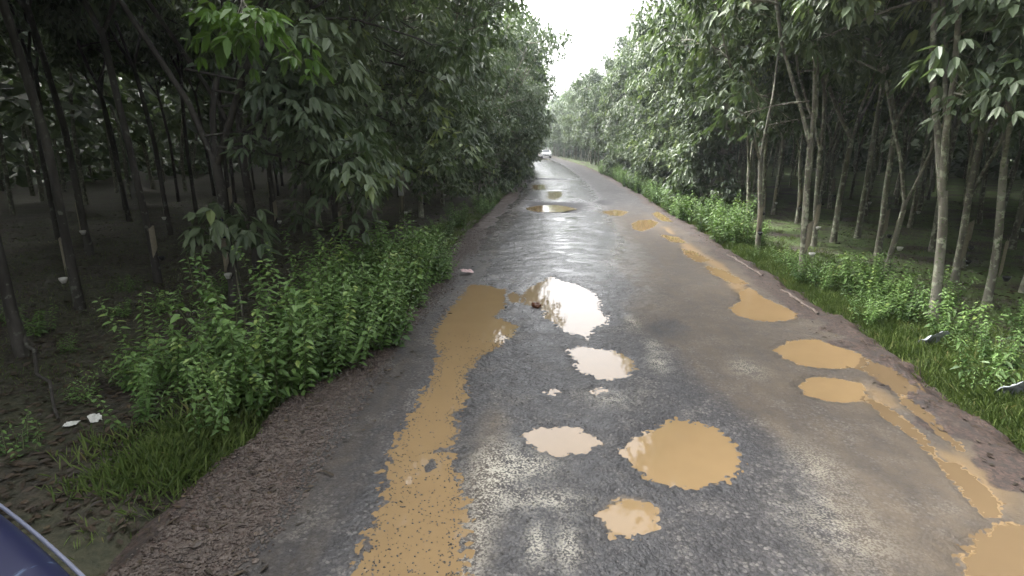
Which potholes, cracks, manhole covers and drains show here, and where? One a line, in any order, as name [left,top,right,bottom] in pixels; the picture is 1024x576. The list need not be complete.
pothole [627,219,663,232]
pothole [699,265,756,285]
pothole [678,247,716,263]
pothole [583,484,679,546]
pothole [510,418,617,462]
pothole [519,273,617,341]
pothole [765,335,877,371]
pothole [522,196,587,214]
pothole [557,342,648,383]
pothole [342,283,526,576]
pothole [788,371,881,407]
pothole [722,285,807,324]
